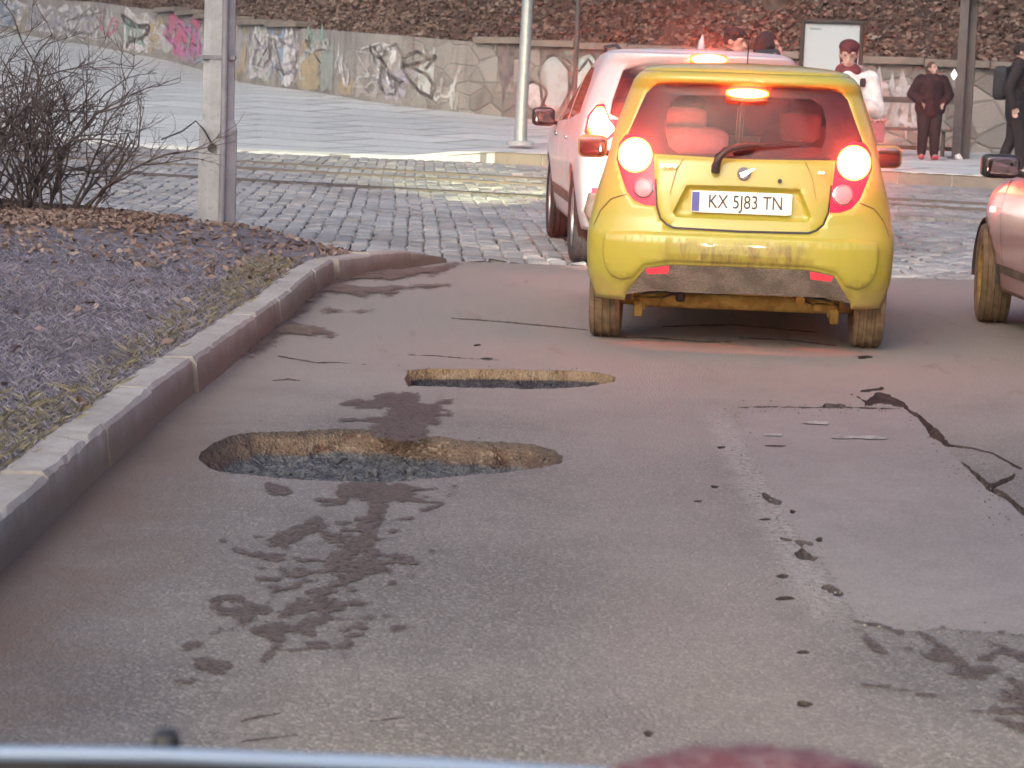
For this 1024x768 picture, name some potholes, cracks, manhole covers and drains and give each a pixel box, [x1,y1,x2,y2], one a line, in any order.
crack [272,356,366,381]
crack [738,406,1024,516]
pothole [199,428,563,483]
crack [451,318,586,330]
pothole [405,368,616,389]
